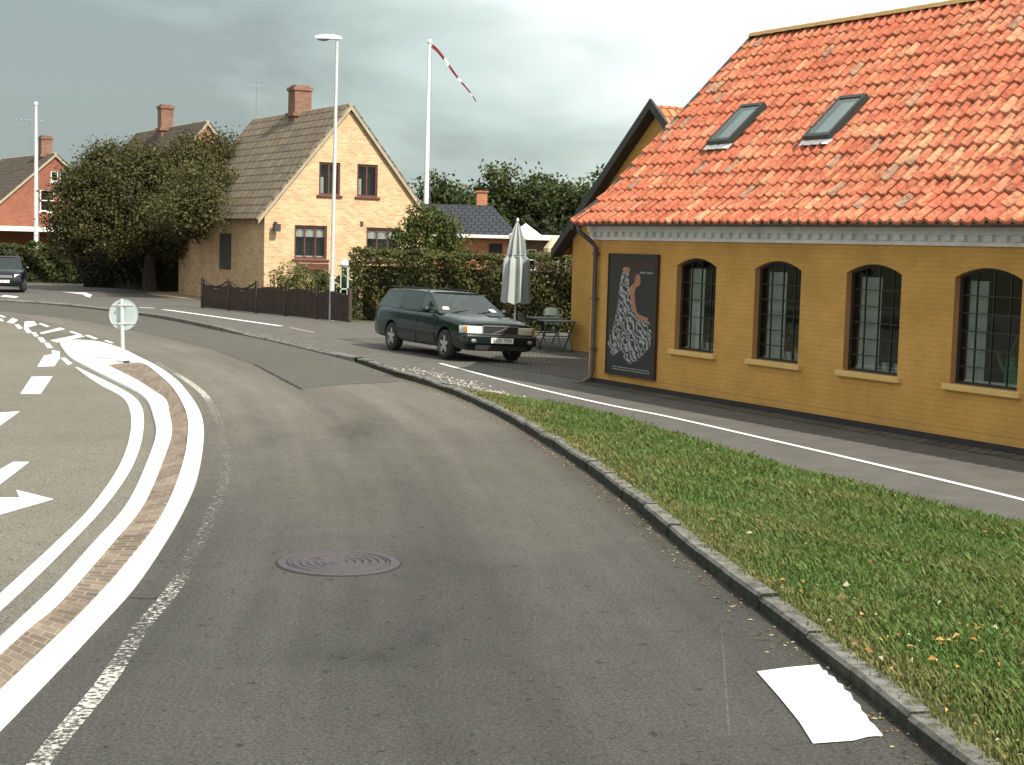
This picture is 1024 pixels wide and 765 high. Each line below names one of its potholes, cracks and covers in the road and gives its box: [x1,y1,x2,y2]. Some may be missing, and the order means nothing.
manhole cover [275,550,402,577]
